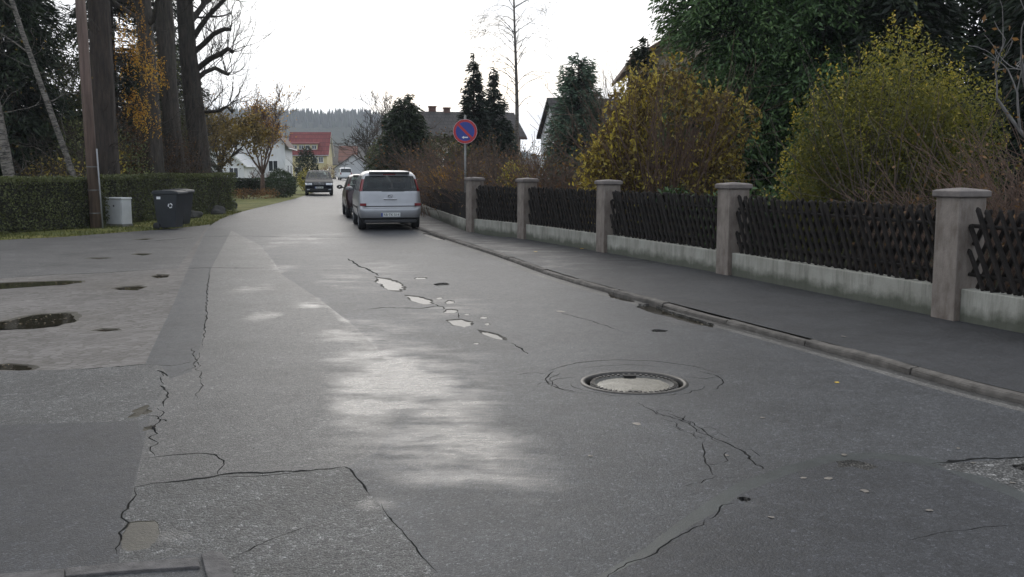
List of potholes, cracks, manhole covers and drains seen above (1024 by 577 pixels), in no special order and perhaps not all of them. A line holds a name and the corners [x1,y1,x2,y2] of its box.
pothole [478,330,507,340]
manhole cover [580,371,689,395]
pothole [405,295,434,305]
pothole [0,363,40,371]
crack [607,502,735,577]
pothole [374,276,407,292]
pothole [0,312,82,330]
crack [186,275,210,400]
crack [639,403,765,487]
crack [348,259,528,354]
crack [115,370,438,573]
pothole [0,280,85,289]
